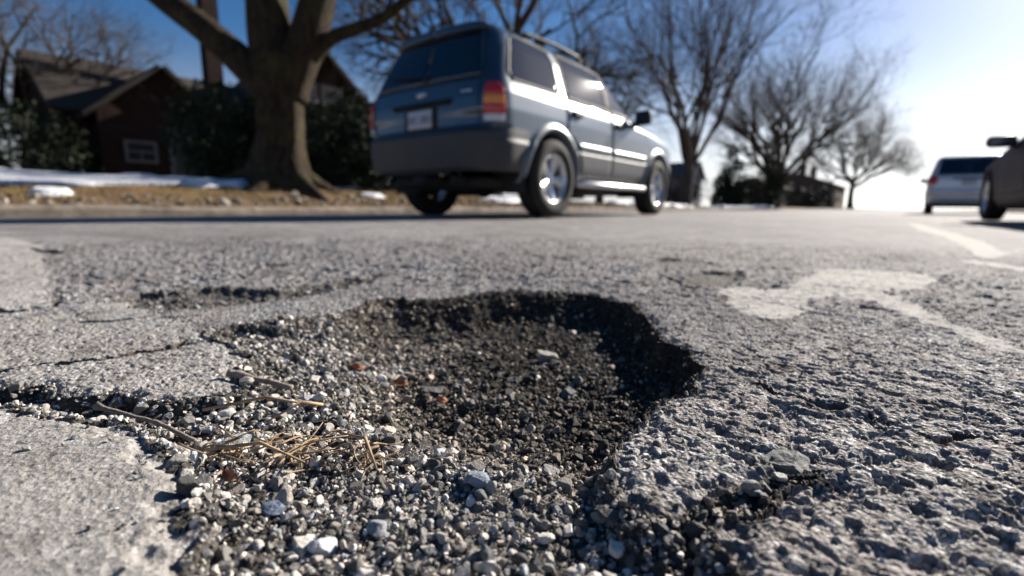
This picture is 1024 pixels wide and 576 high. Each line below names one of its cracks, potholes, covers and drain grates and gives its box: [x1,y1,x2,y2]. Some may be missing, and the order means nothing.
pothole [113,274,385,310]
pothole [0,290,834,576]
crack [0,298,234,373]
